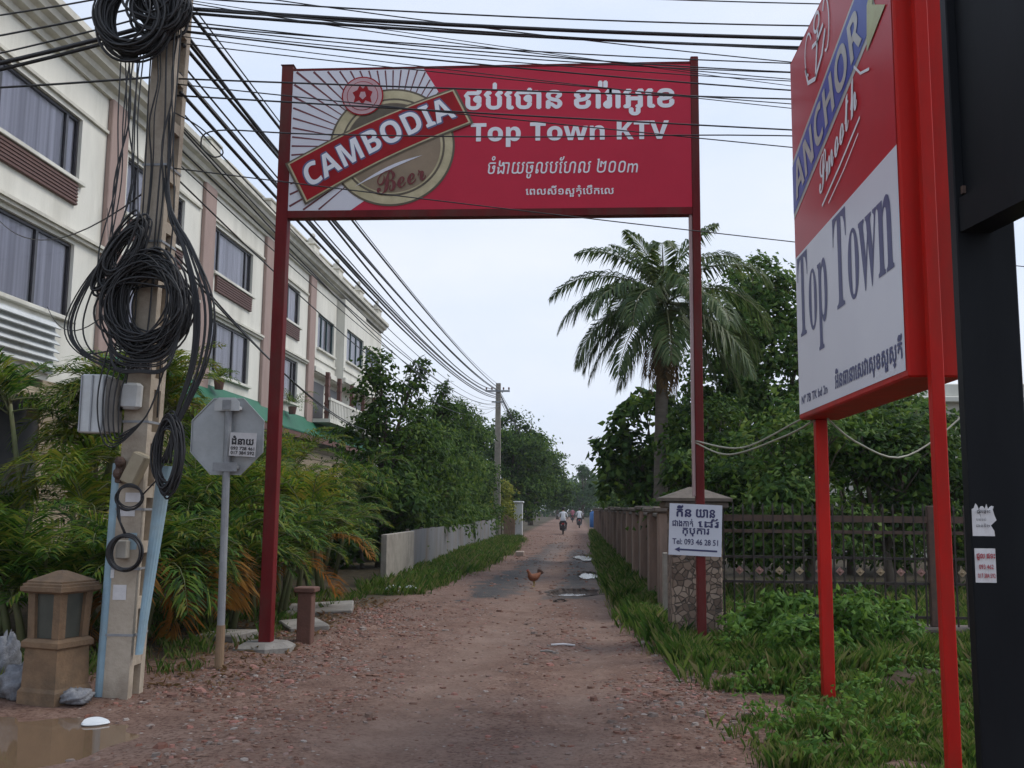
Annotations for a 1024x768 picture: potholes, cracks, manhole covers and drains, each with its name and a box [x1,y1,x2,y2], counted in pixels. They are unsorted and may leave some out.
pothole [546,588,605,597]
pothole [576,571,598,580]
